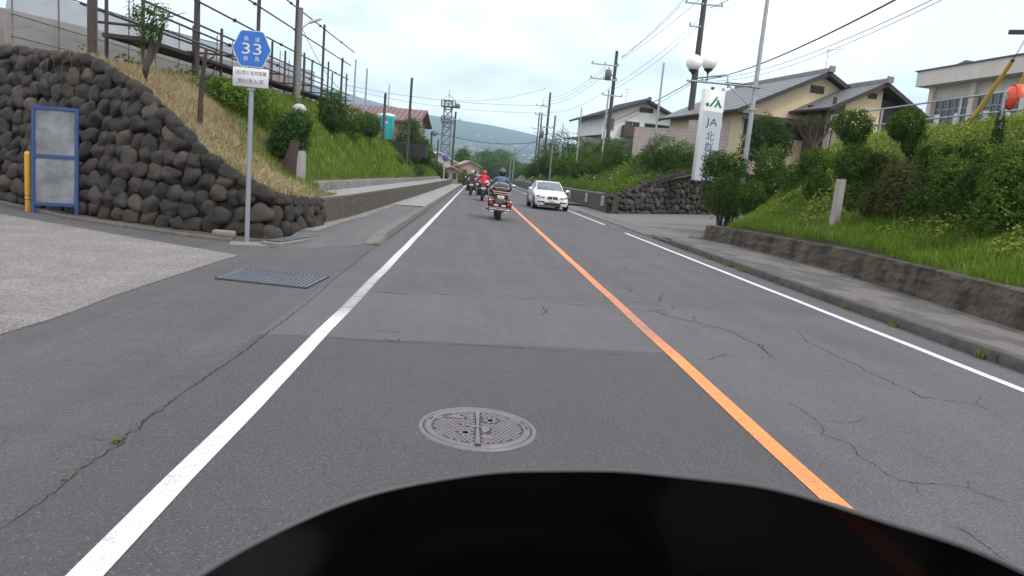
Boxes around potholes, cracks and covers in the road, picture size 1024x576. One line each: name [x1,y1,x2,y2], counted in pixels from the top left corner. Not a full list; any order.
manhole cover [418,407,537,452]
crack [637,295,771,357]
crack [787,401,1019,505]
drain grate [214,268,329,289]
crack [793,327,1002,420]
